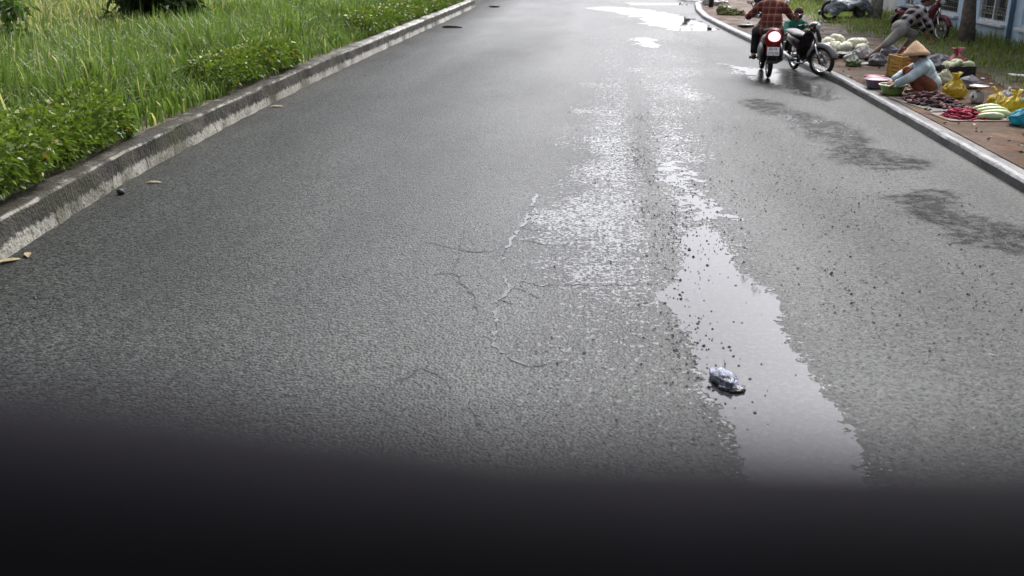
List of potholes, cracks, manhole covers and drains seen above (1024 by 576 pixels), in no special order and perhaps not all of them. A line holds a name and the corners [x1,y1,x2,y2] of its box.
crack [427,193,638,367]
